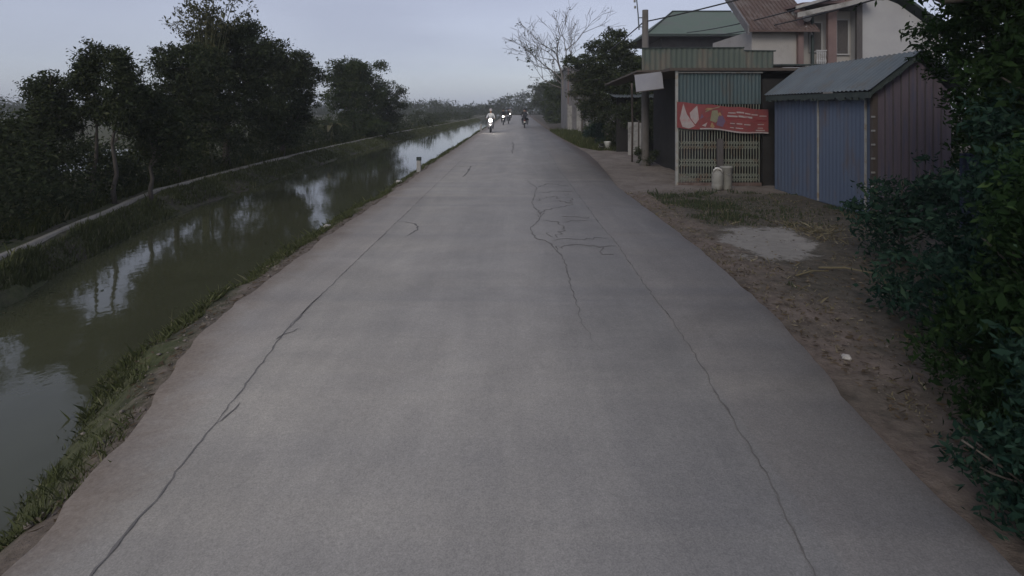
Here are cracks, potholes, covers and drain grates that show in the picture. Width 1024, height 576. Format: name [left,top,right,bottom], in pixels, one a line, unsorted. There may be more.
crack [525,178,612,338]
